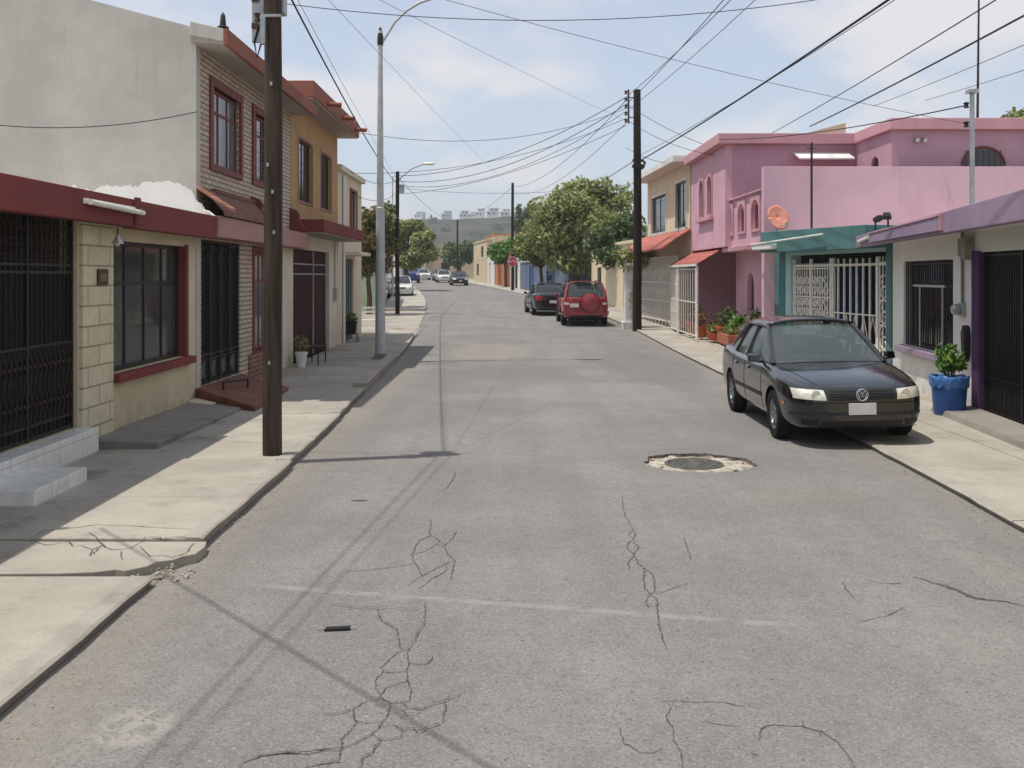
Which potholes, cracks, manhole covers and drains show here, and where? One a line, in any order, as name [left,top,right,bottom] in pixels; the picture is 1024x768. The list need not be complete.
crack [620,700,740,768]
manhole cover [664,458,724,470]
crack [235,602,461,767]
crack [30,524,193,560]
crack [750,721,855,767]
crack [843,576,1024,606]
crack [622,496,687,649]
